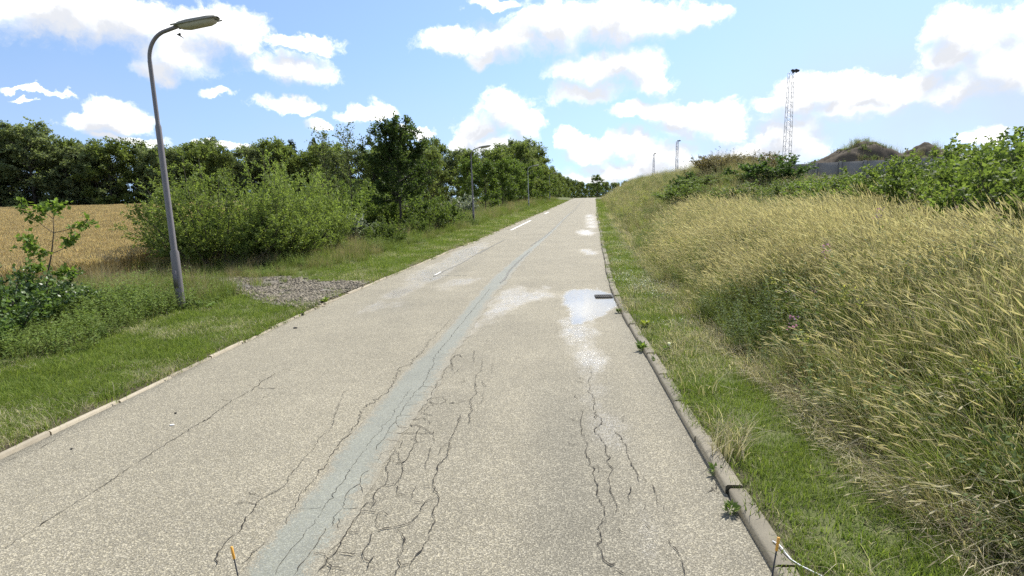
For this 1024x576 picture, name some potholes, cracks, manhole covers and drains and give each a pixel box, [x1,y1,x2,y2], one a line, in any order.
crack [10,368,289,545]
crack [572,375,685,573]
crack [215,291,517,574]
